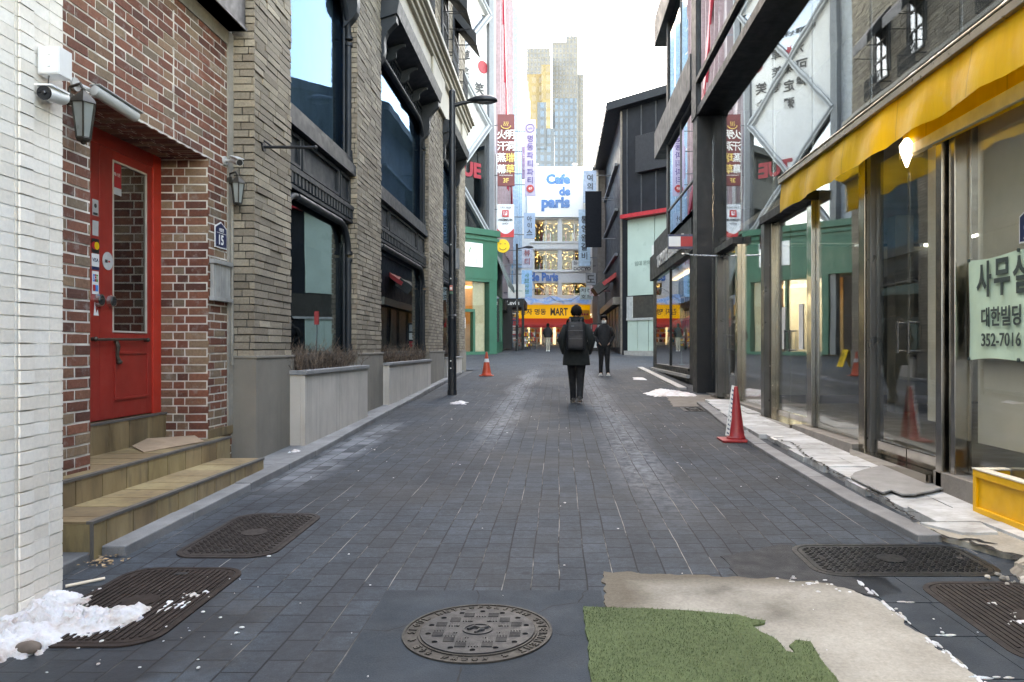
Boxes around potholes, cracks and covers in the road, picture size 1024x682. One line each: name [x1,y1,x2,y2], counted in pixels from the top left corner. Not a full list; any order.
manhole cover [402,604,552,664]
crack [939,534,1024,560]
crack [763,438,919,520]
